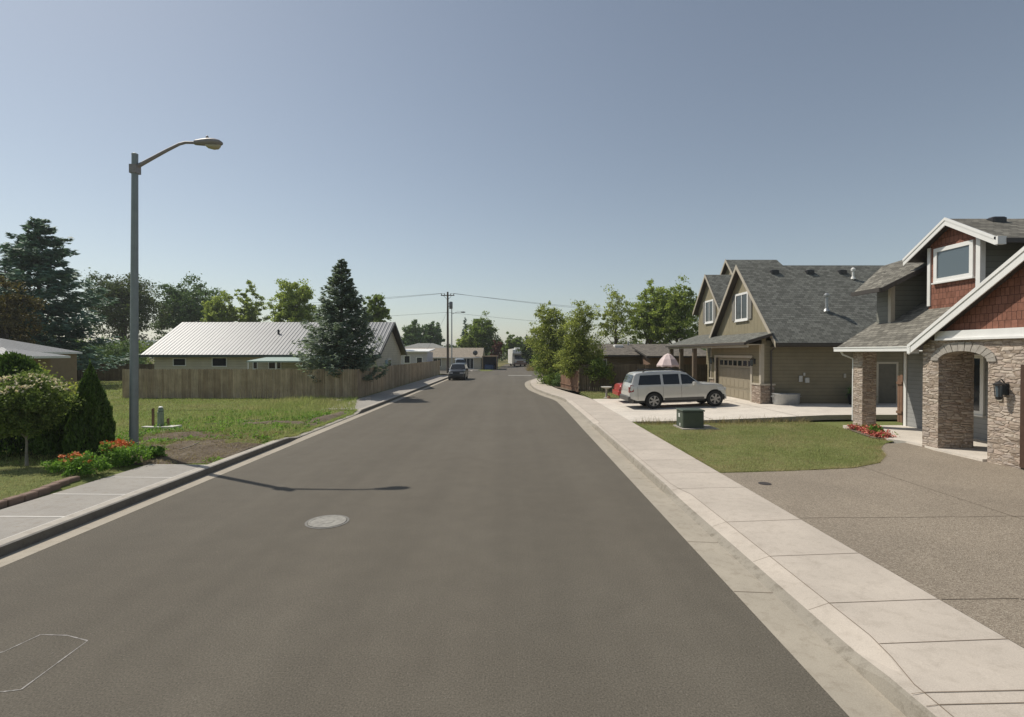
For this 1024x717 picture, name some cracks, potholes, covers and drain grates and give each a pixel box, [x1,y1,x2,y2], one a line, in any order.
manhole cover [305,515,349,529]
